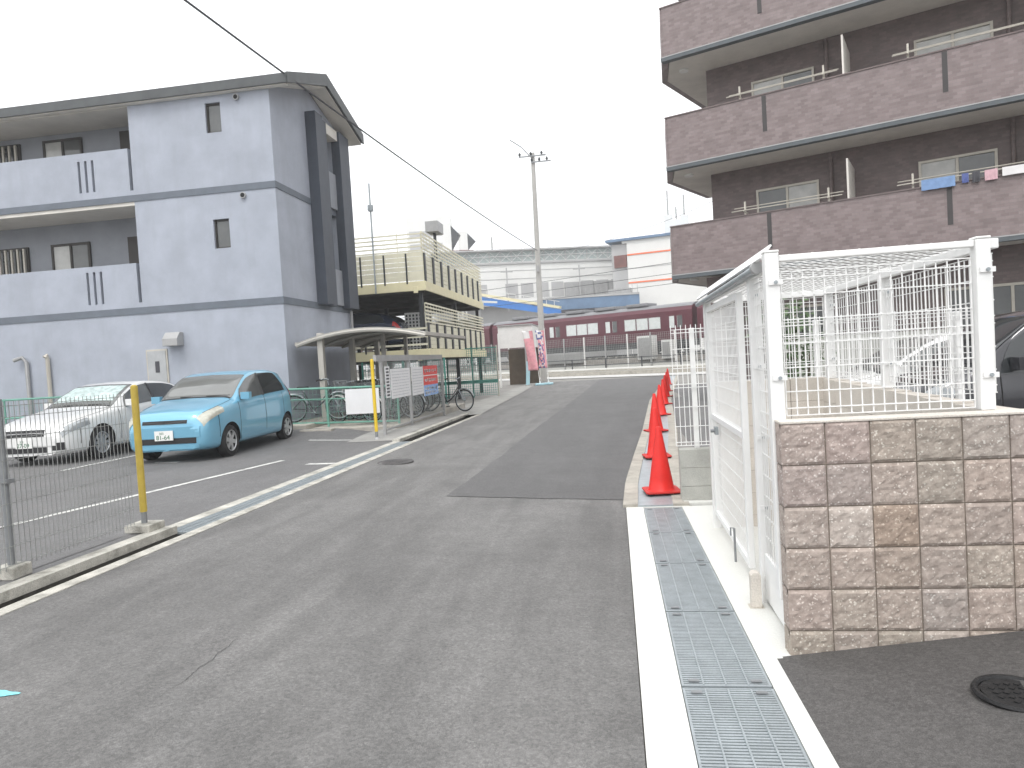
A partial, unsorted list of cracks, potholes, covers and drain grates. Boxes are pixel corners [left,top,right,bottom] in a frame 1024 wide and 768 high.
drain grate [666,612,772,689]
drain grate [656,563,734,613]
manhole cover [970,674,1024,713]
drain grate [649,532,709,565]
drain grate [682,688,813,768]
drain grate [644,507,694,533]
